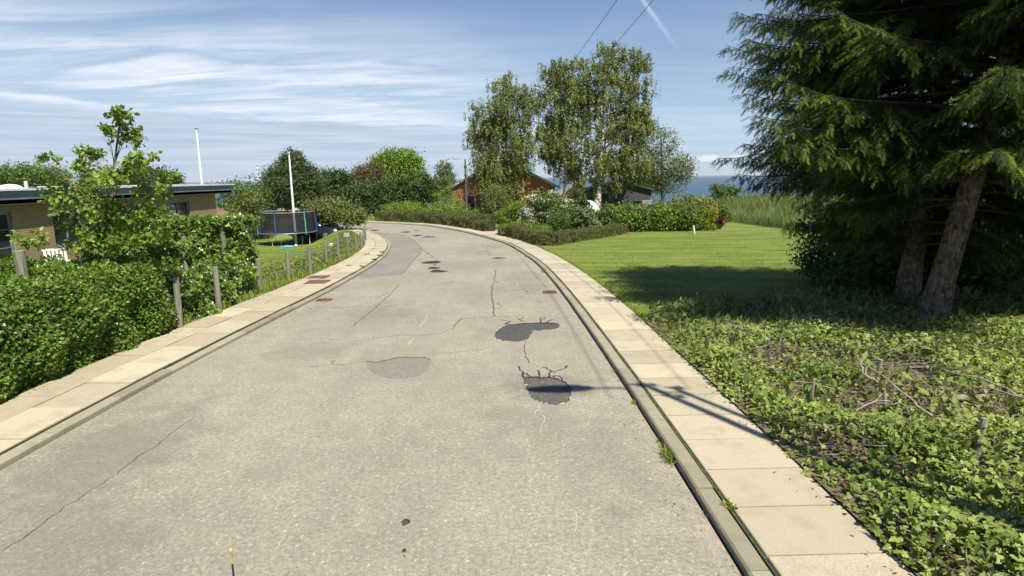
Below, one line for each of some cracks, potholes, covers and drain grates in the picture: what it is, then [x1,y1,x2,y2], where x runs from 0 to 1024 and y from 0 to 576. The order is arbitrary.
crack [3,417,195,551]
crack [566,494,587,573]
pothole [494,322,560,342]
crack [535,403,557,449]
pothole [524,376,572,405]
crack [302,232,540,344]
